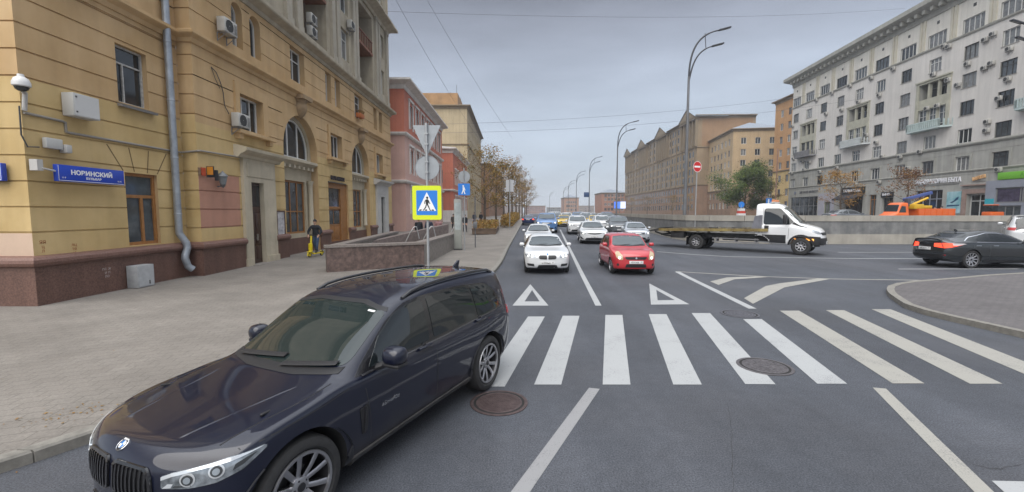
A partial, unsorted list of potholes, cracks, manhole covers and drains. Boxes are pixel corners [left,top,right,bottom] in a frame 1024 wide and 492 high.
manhole cover [720,310,760,318]
manhole cover [736,357,795,376]
manhole cover [470,390,528,416]
